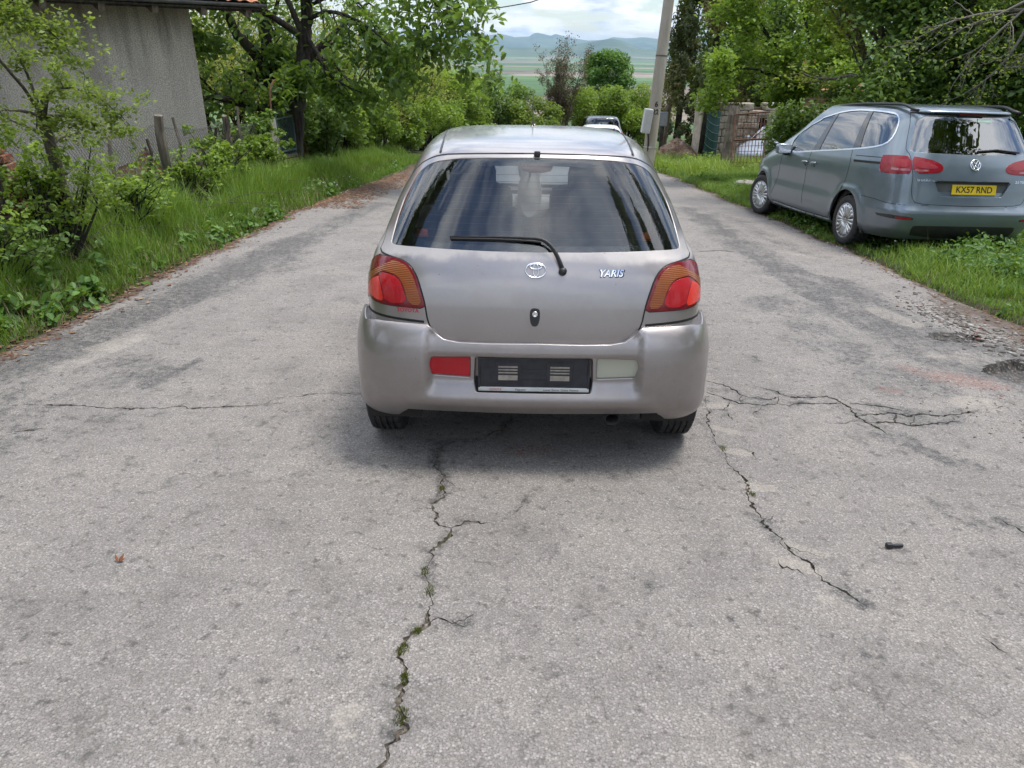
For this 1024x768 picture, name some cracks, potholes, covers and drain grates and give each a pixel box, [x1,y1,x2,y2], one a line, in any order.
crack [10,393,357,410]
crack [376,417,513,768]
crack [705,381,1004,606]
pothole [981,359,1024,383]
